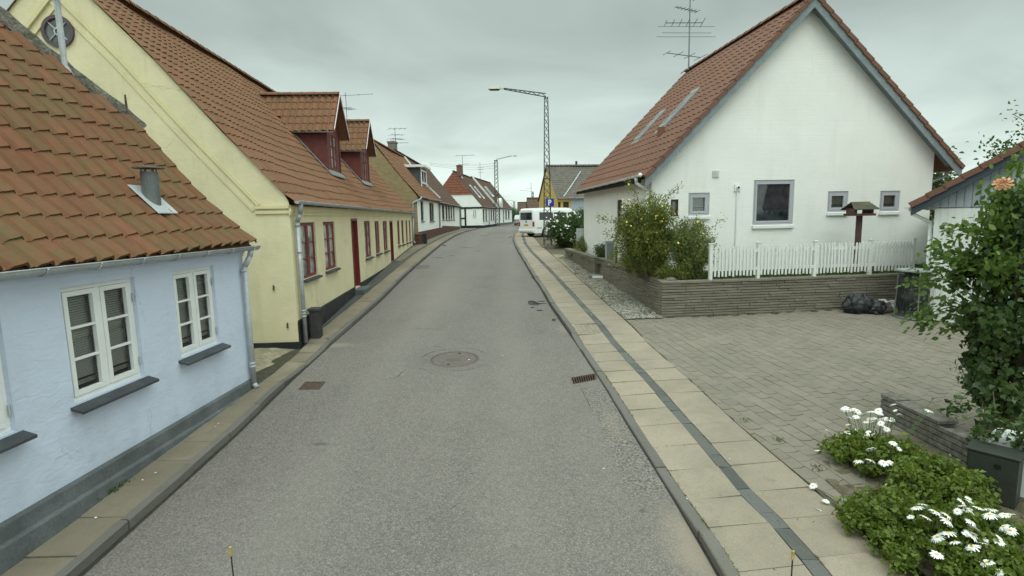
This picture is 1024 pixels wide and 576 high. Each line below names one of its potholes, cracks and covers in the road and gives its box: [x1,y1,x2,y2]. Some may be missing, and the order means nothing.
drain grate [571,373,597,384]
manhole cover [429,351,479,368]
